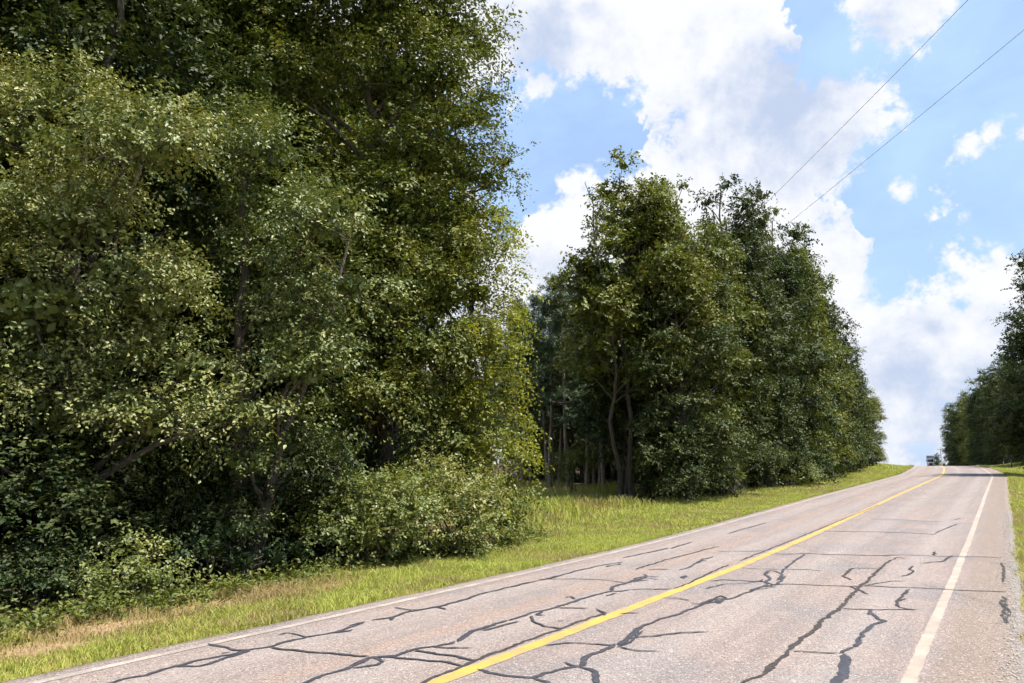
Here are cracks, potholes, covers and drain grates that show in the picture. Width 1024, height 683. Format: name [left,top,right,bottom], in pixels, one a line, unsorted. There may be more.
crack [593,518,1011,683]
